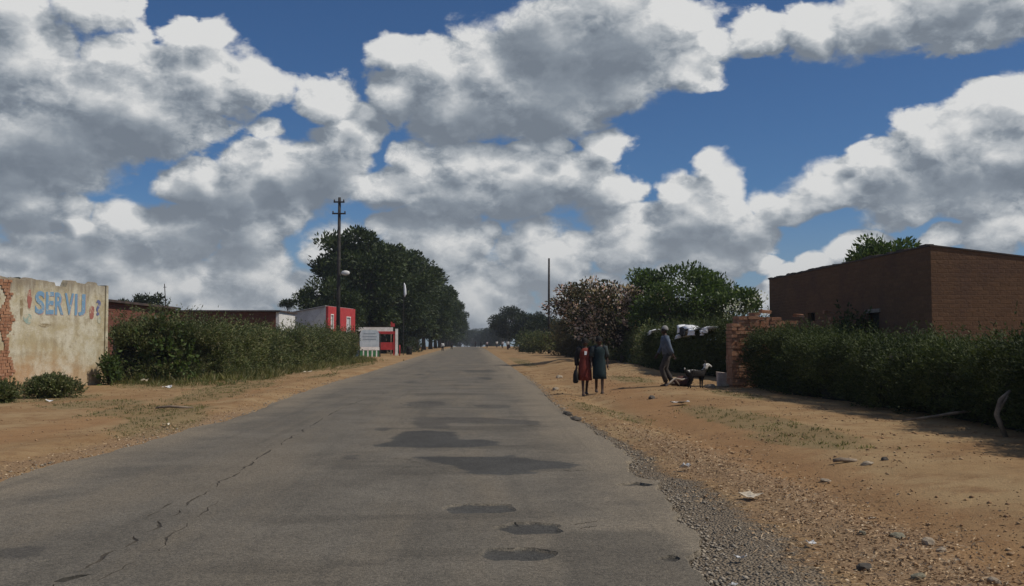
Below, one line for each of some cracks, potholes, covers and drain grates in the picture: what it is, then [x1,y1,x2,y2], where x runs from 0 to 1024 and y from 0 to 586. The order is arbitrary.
crack [52,393,384,586]
pothole [493,522,563,535]
pothole [479,547,558,561]
